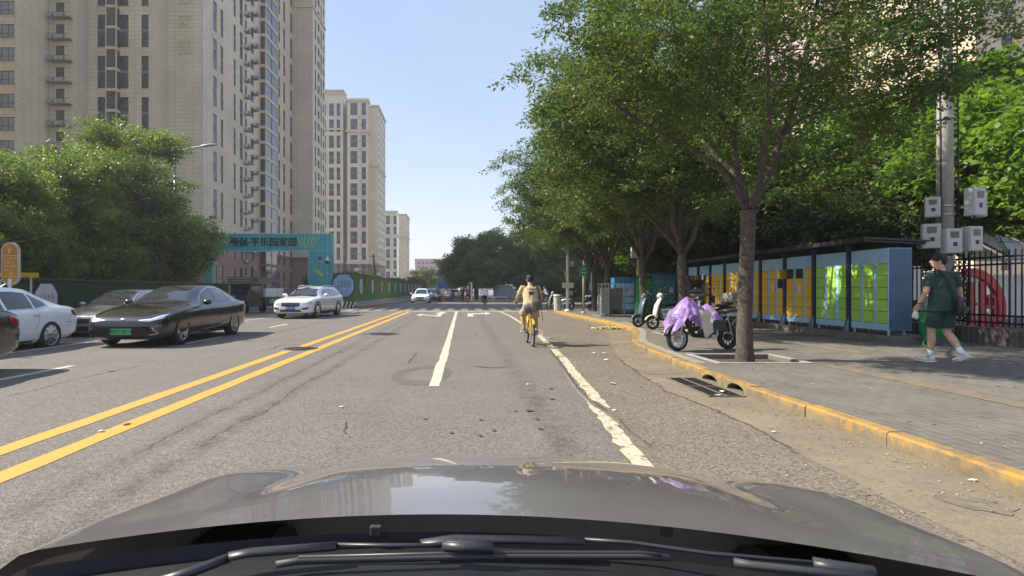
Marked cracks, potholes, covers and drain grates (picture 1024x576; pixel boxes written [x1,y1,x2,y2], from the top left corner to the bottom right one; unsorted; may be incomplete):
crack [122,351,340,459]
drain grate [666,377,746,397]
